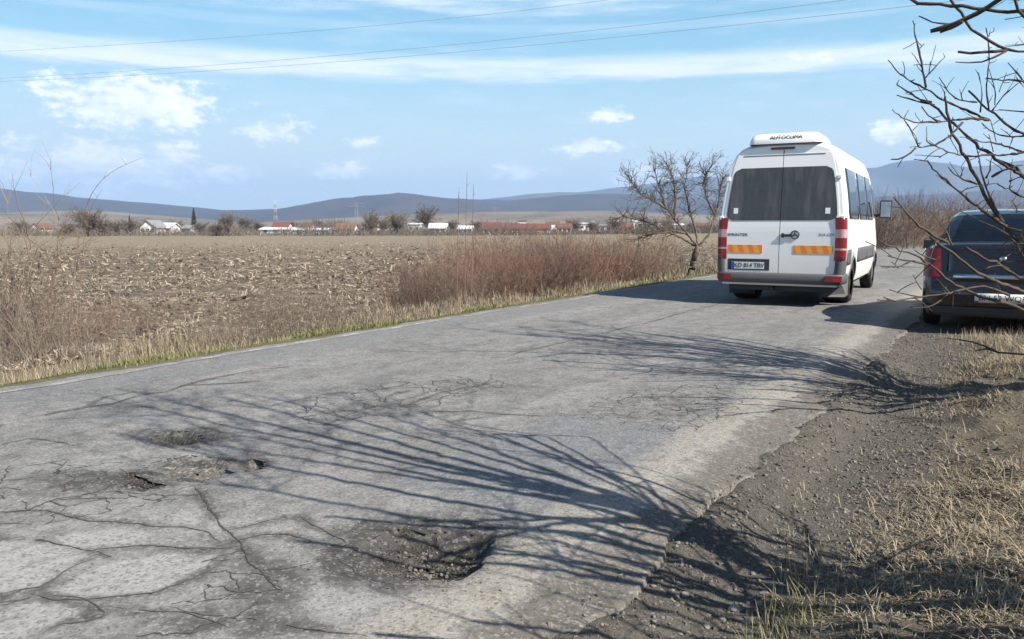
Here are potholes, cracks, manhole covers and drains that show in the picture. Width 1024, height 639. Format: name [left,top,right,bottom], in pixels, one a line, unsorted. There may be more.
pothole [141,427,214,448]
crack [270,376,529,425]
crack [0,486,367,636]
pothole [109,448,250,491]
pothole [227,456,276,474]
crack [0,459,191,524]
pothole [102,469,177,495]
crack [578,383,754,432]
pothole [289,511,539,605]
